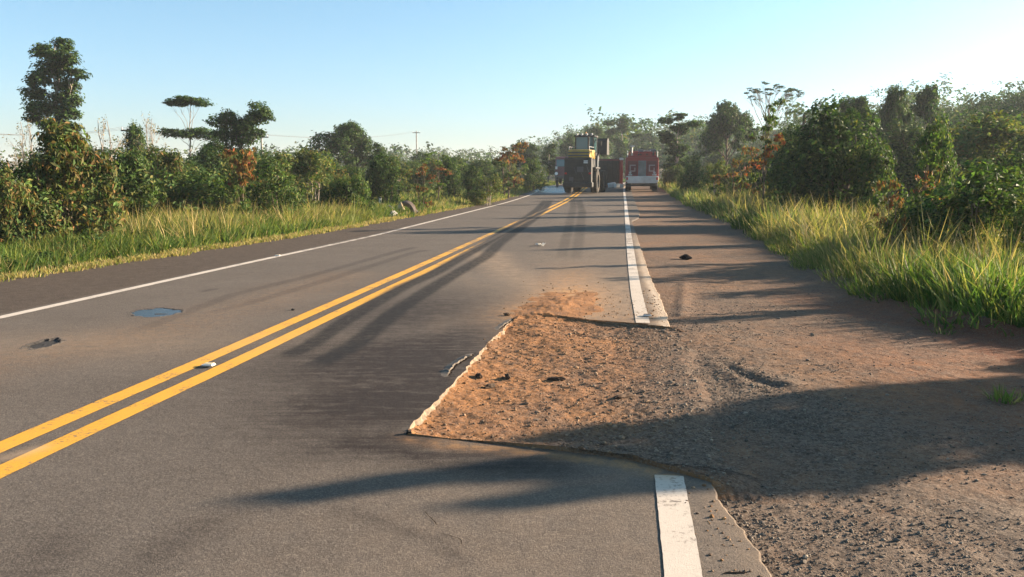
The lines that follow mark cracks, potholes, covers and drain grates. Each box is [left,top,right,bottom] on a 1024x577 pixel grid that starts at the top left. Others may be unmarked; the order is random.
pothole [19,337,67,350]
pothole [126,307,187,318]
pothole [407,314,770,501]
crack [439,353,475,377]
